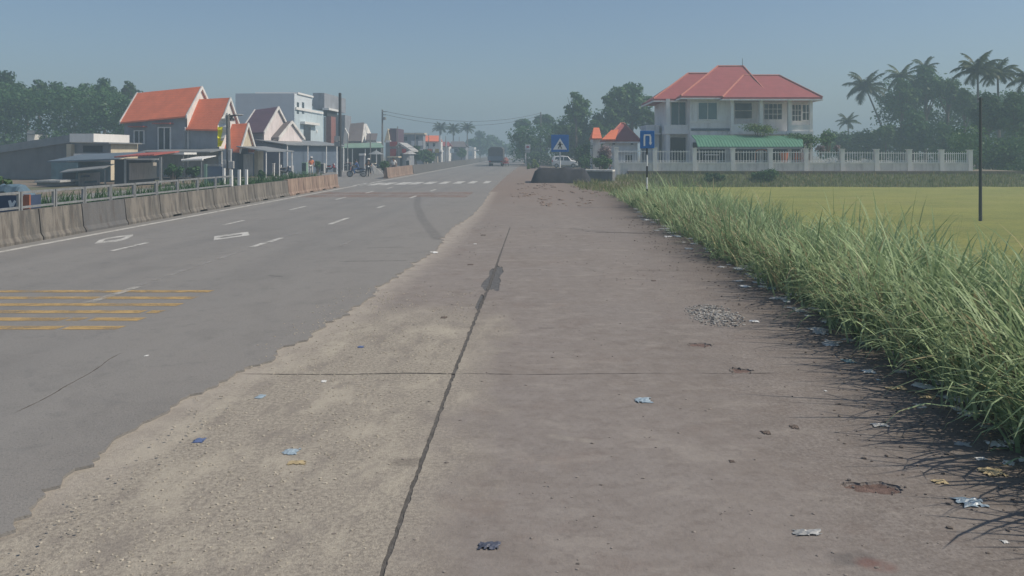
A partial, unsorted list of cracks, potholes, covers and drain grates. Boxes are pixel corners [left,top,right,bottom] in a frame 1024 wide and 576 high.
pothole [840,478,907,495]
crack [13,353,121,414]
